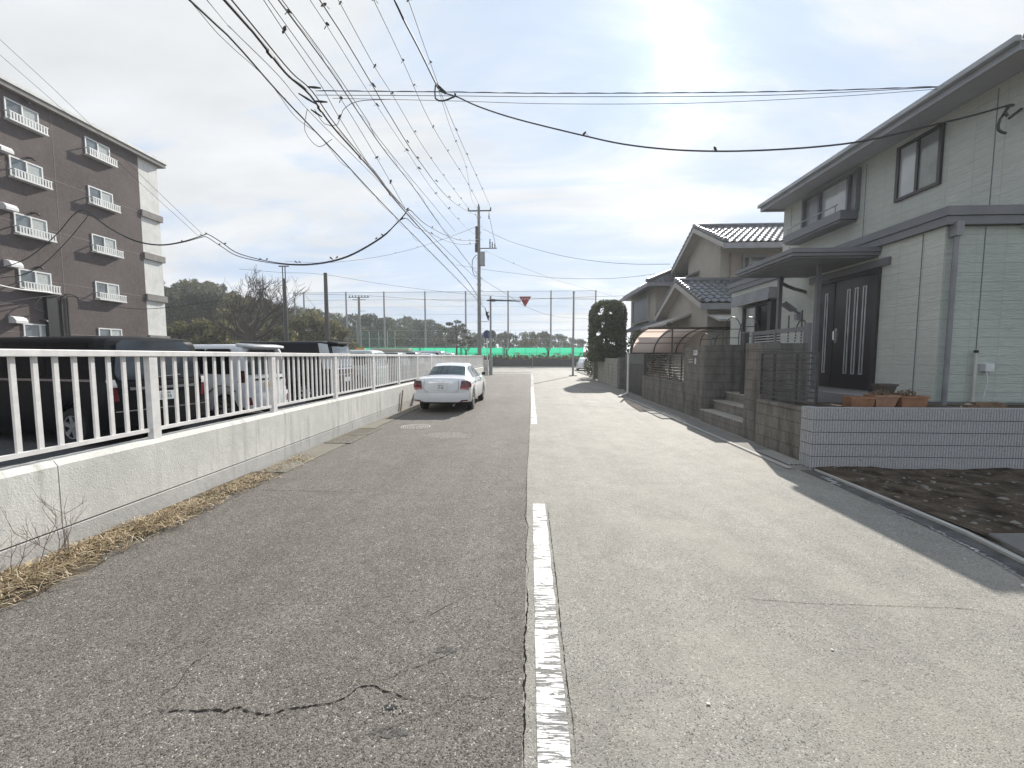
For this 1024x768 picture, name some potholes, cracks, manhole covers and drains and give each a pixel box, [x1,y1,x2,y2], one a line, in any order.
crack [115,652,494,734]
